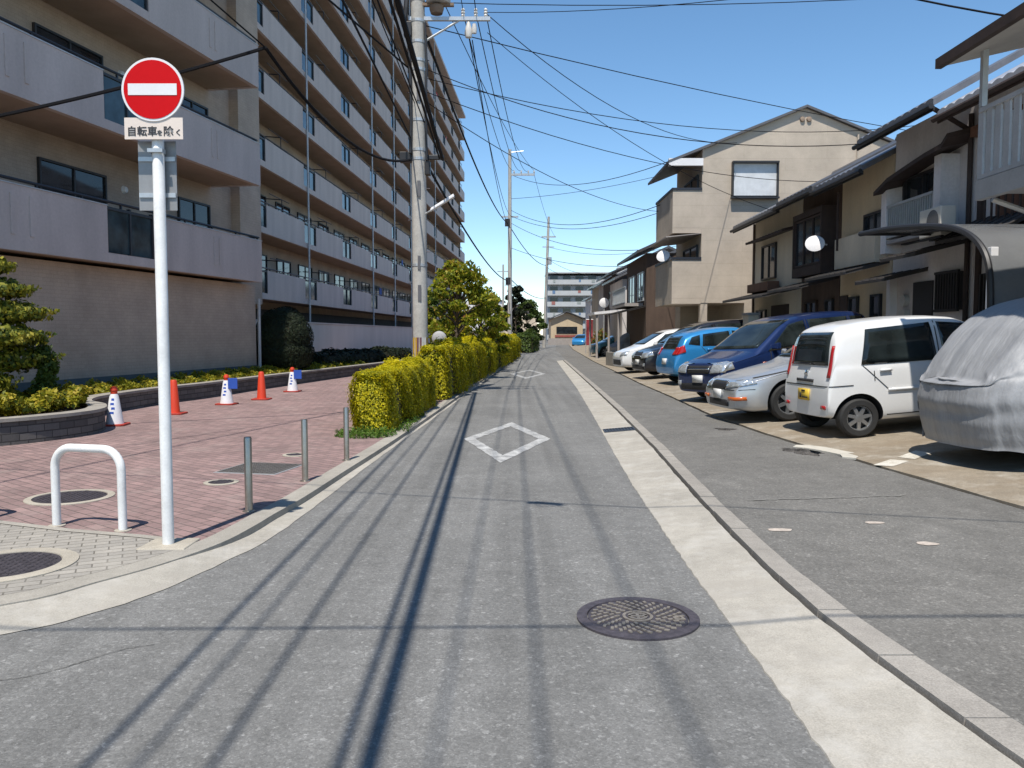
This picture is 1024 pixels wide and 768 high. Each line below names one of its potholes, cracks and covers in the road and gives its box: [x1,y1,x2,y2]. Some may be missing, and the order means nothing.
manhole cover [213,462,302,475]
manhole cover [23,489,115,506]
manhole cover [577,597,700,641]
crack [3,644,152,680]
manhole cover [0,548,79,583]
